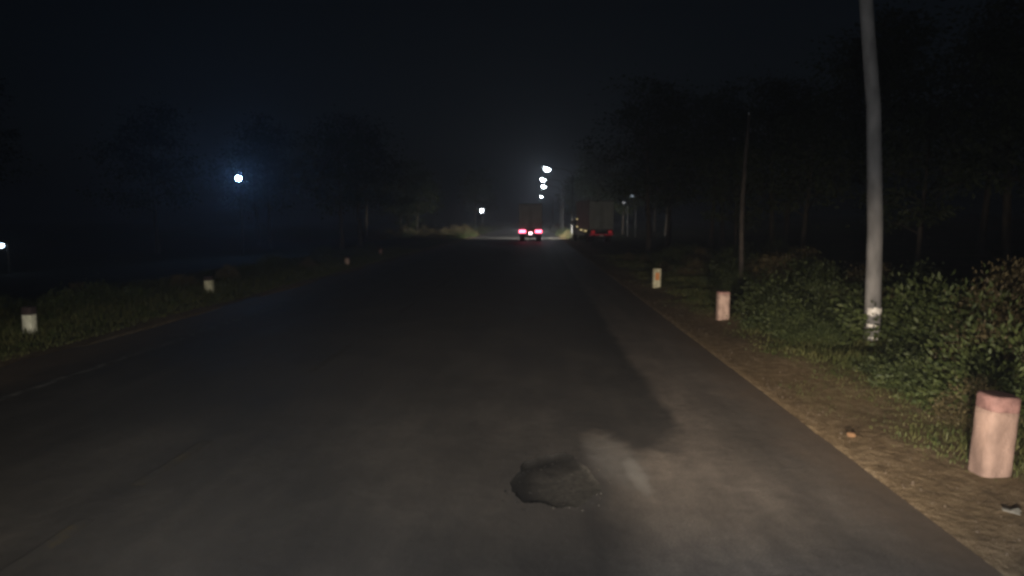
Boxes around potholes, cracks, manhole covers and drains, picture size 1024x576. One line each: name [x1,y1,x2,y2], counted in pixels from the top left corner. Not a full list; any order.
pothole [498,450,611,511]
